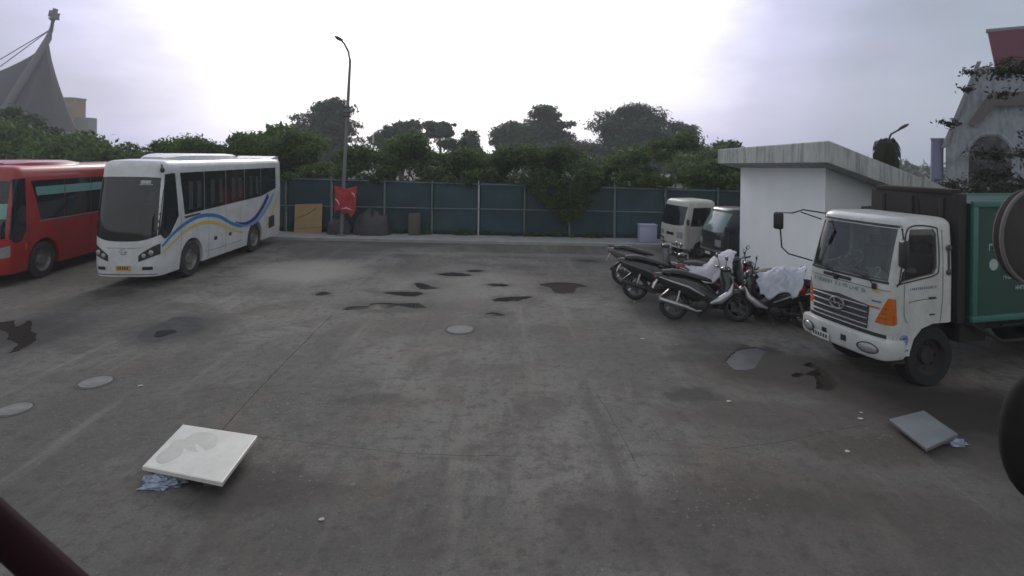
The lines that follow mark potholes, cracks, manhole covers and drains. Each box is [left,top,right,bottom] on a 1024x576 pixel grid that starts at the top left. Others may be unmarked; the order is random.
manhole cover [0,401,38,418]
manhole cover [73,375,117,390]
pothole [540,283,587,294]
pothole [791,362,840,391]
pothole [0,320,37,353]
manhole cover [444,325,476,335]
